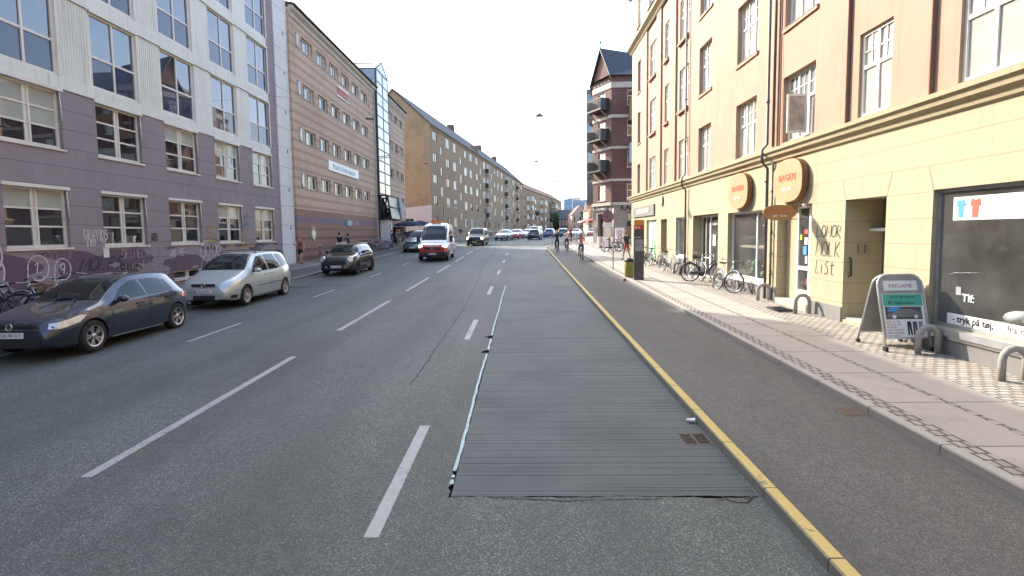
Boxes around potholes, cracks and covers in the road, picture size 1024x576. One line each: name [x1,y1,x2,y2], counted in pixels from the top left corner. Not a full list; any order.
crack [410,273,481,385]
drain grate [676,433,713,444]
